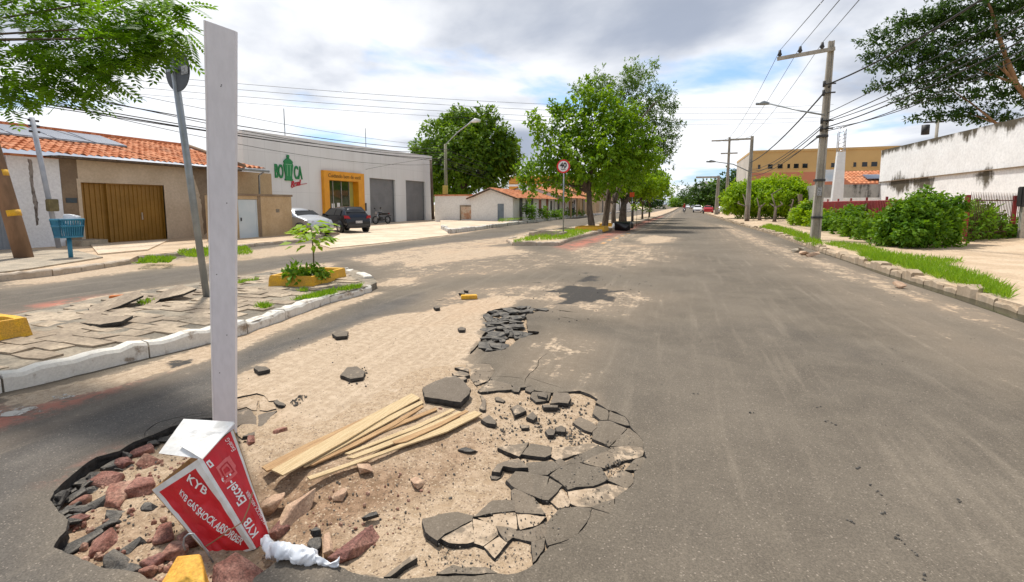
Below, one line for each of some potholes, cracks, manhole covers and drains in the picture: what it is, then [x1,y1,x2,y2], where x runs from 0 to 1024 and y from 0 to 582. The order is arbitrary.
pothole [50,362,647,582]
crack [422,353,645,576]
